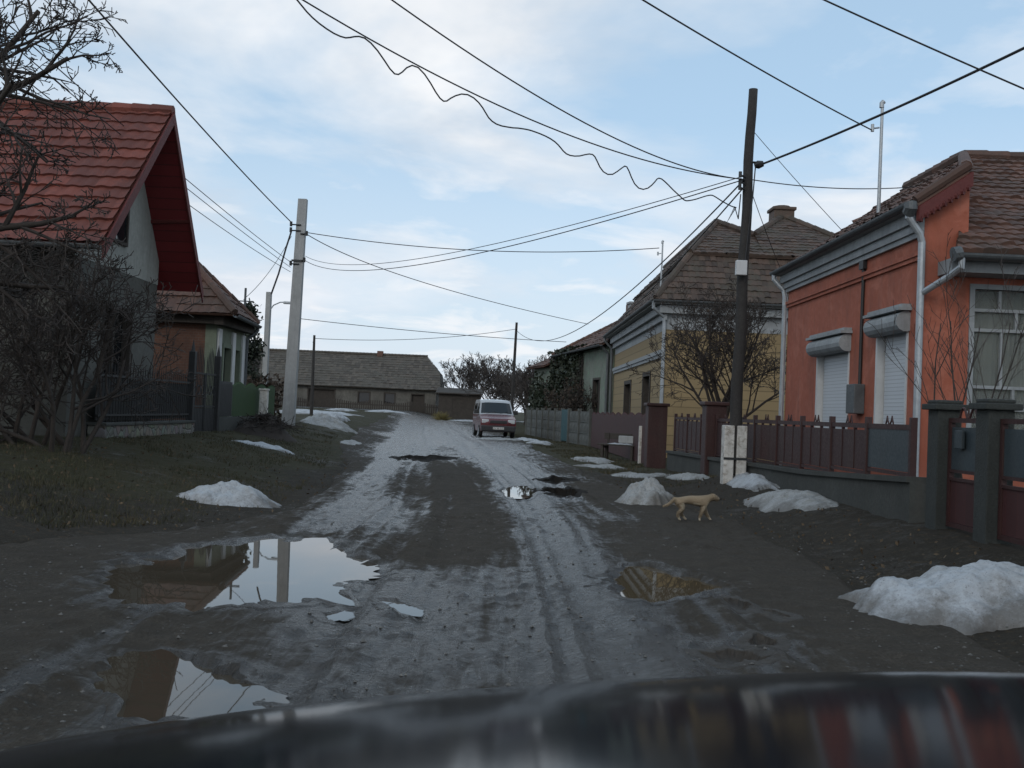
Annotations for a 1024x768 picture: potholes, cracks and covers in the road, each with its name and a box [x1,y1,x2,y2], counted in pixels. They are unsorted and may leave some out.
pothole [389,454,460,462]
pothole [487,484,551,502]
pothole [67,646,306,726]
pothole [68,533,399,616]
pothole [583,559,761,606]
pothole [532,475,580,485]
pothole [531,486,588,498]
